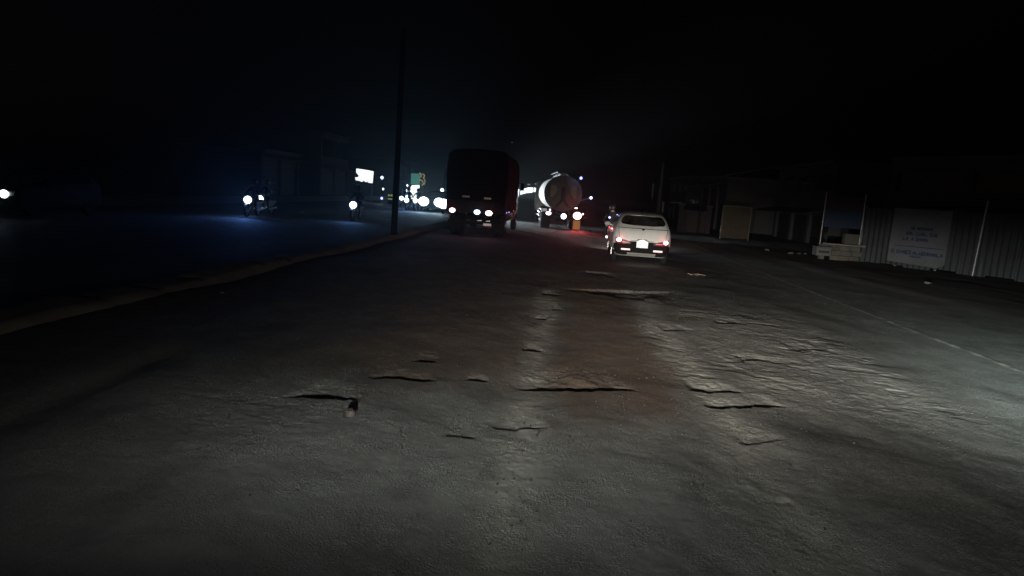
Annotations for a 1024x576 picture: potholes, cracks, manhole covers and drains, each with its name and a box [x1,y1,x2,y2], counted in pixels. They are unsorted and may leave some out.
pothole [464,370,489,382]
pothole [561,288,706,310]
pothole [513,364,640,392]
pothole [710,315,750,325]
pothole [680,376,748,394]
pothole [521,340,546,353]
pothole [368,361,439,382]
pothole [646,318,696,332]
pothole [411,349,440,363]
pothole [715,418,790,447]
pothole [696,392,791,410]
pothole [440,416,480,440]
